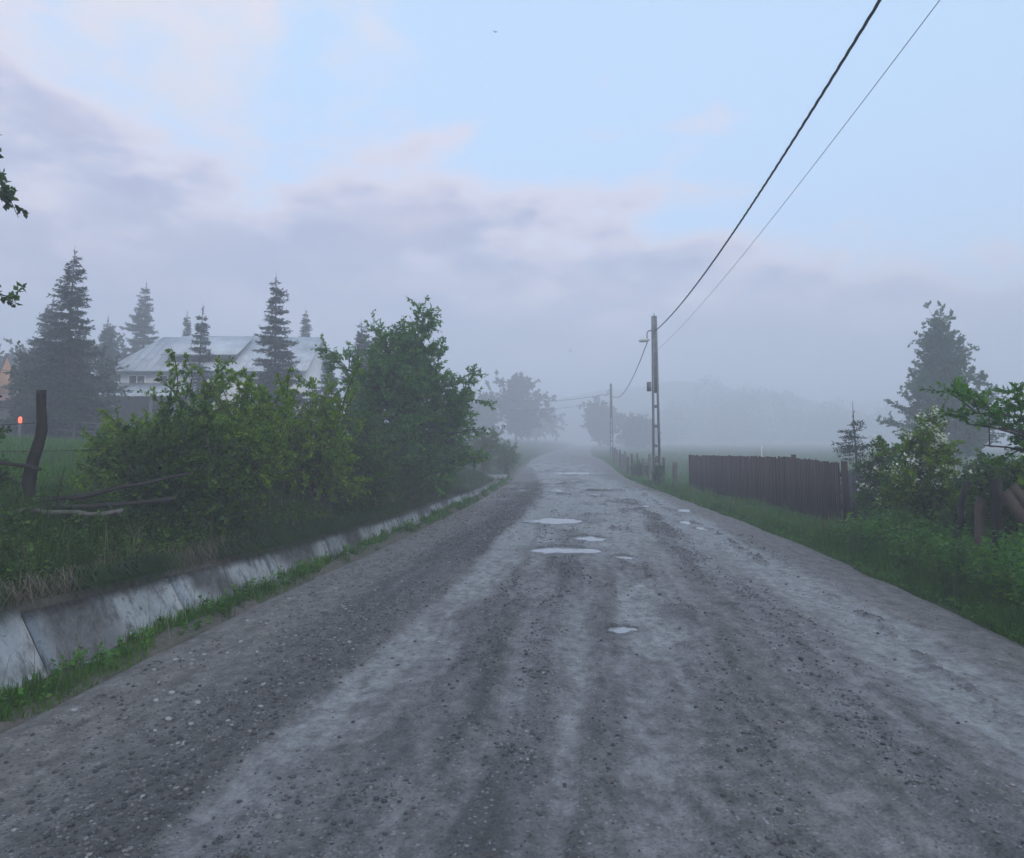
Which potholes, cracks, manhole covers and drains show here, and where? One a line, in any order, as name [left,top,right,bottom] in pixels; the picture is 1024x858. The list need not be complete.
pothole [513,543,614,556]
pothole [556,533,615,543]
pothole [597,622,647,636]
pothole [512,517,602,525]
